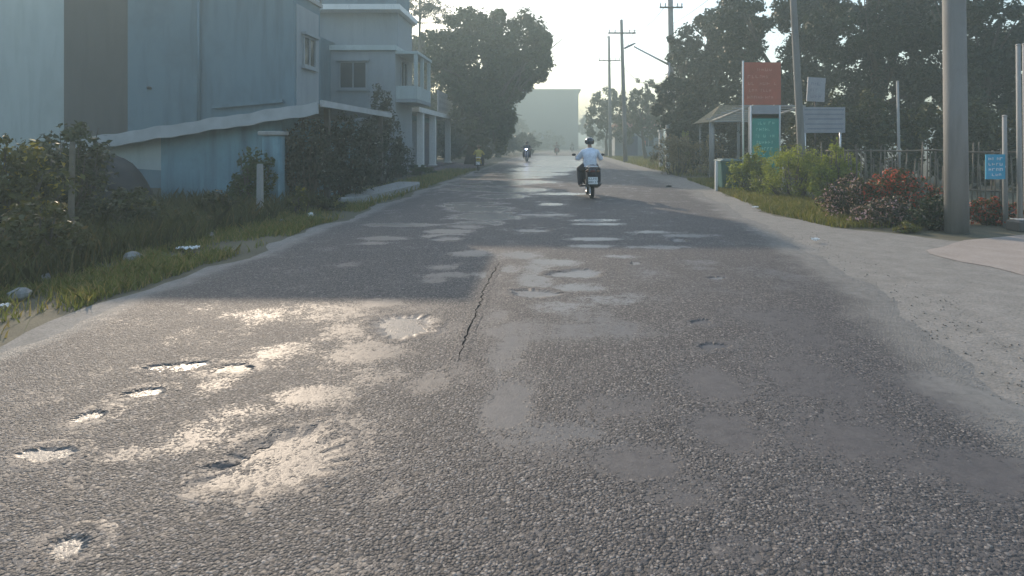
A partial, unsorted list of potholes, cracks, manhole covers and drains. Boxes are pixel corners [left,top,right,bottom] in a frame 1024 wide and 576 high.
pothole [356,311,450,344]
pothole [49,403,128,431]
pothole [0,439,100,473]
pothole [103,381,182,404]
crack [449,262,505,361]
pothole [127,357,225,378]
pothole [679,316,725,328]
pothole [12,519,121,576]
pothole [159,416,371,513]
pothole [502,286,572,300]
pothole [686,339,743,354]
pothole [193,359,270,379]
